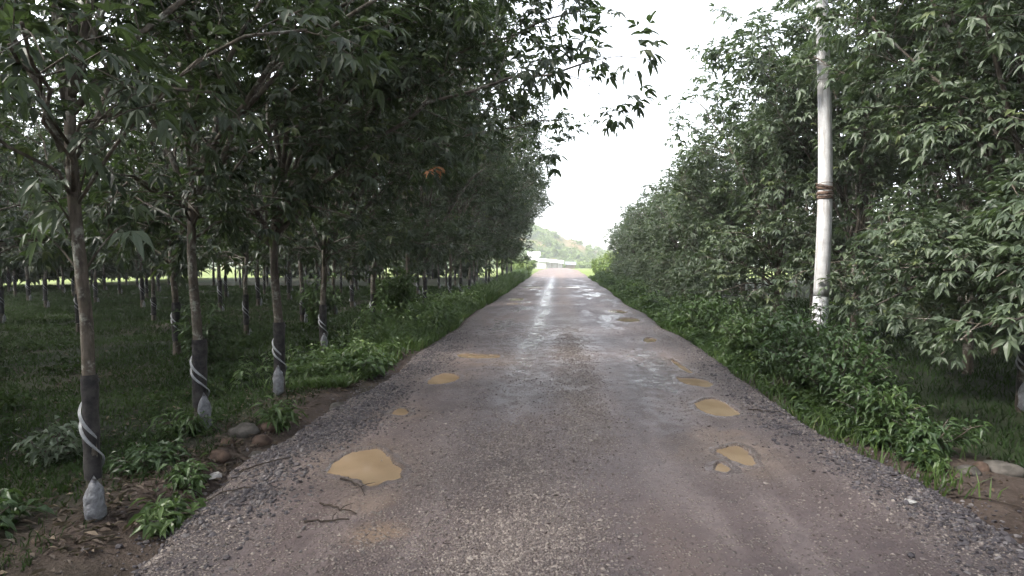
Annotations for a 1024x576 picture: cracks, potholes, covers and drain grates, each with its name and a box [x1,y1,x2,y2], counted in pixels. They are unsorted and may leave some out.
pothole [384,407,416,418]
pothole [708,442,764,469]
pothole [672,376,720,389]
pothole [669,358,695,375]
pothole [687,396,747,419]
pothole [315,444,412,491]
pothole [422,372,465,386]
pothole [704,459,742,476]
